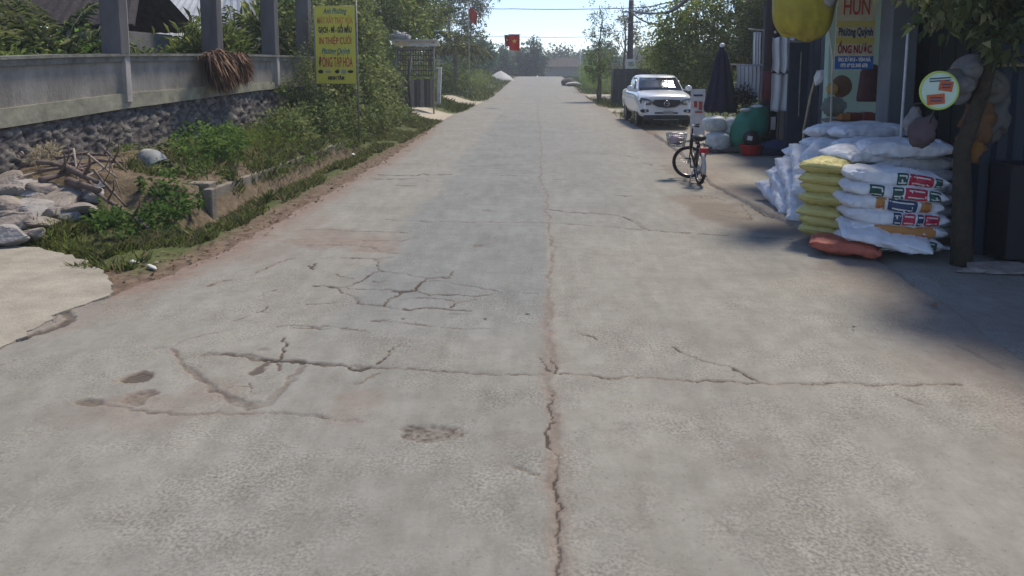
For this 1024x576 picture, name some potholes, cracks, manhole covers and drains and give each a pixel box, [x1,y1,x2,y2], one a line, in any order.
pothole [69,397,110,408]
pothole [386,420,486,447]
pothole [116,388,162,407]
crack [667,346,762,382]
crack [98,96,651,576]
pothole [110,370,157,385]
